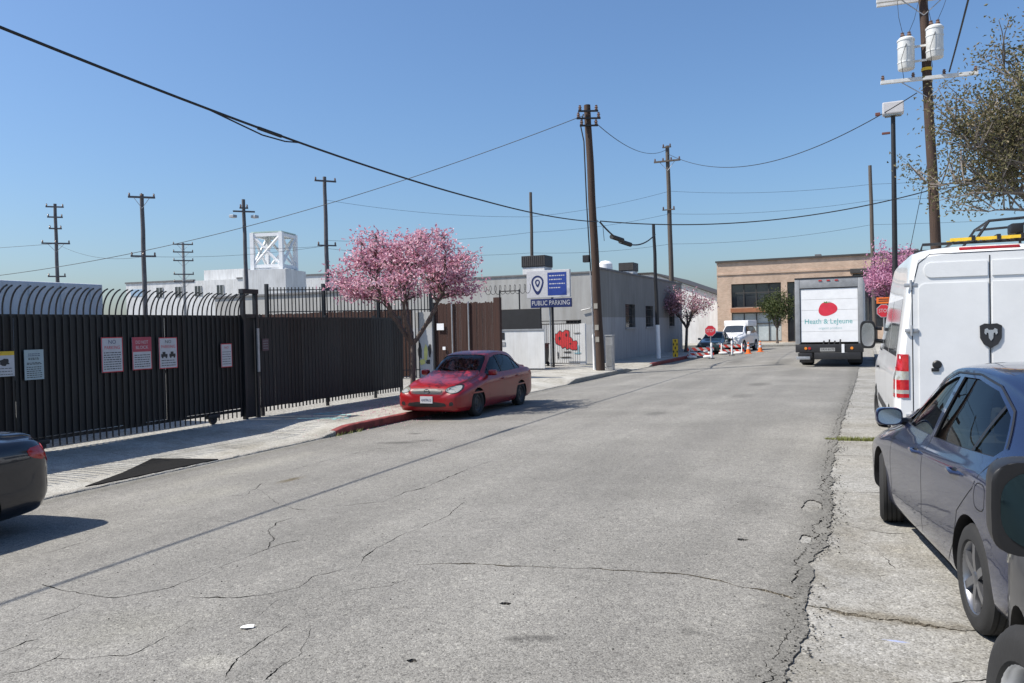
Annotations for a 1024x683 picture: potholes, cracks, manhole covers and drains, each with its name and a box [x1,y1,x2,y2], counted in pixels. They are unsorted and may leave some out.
crack [342,519,976,683]
crack [192,503,463,680]
crack [2,620,191,676]
crack [4,484,299,651]
